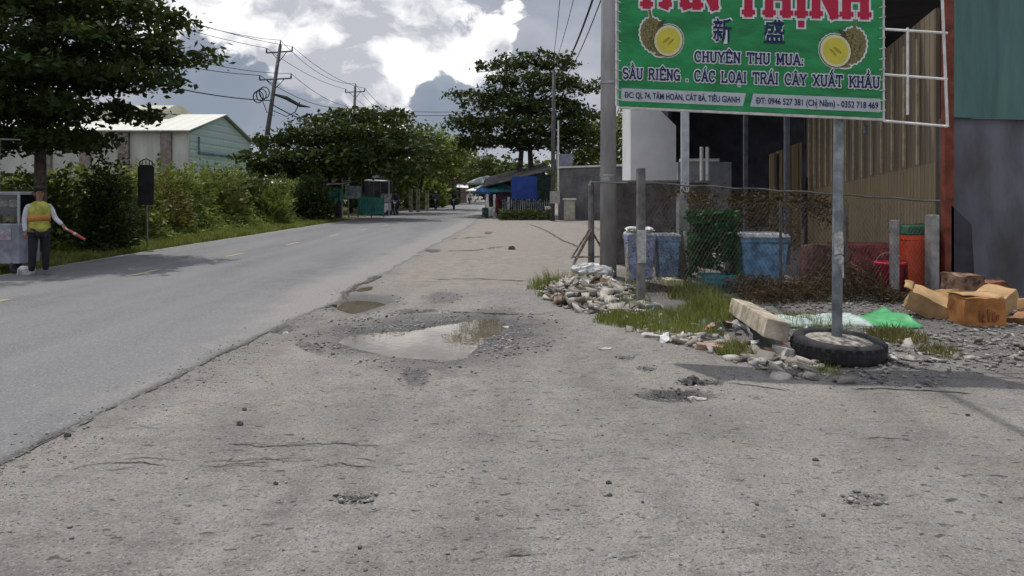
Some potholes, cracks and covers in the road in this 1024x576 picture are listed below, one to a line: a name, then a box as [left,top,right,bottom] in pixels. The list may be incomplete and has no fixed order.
pothole [314,311,553,370]
pothole [328,293,400,314]
pothole [329,493,377,504]
pothole [842,493,888,507]
pothole [400,368,430,389]
pothole [678,378,730,386]
pothole [632,389,721,403]
